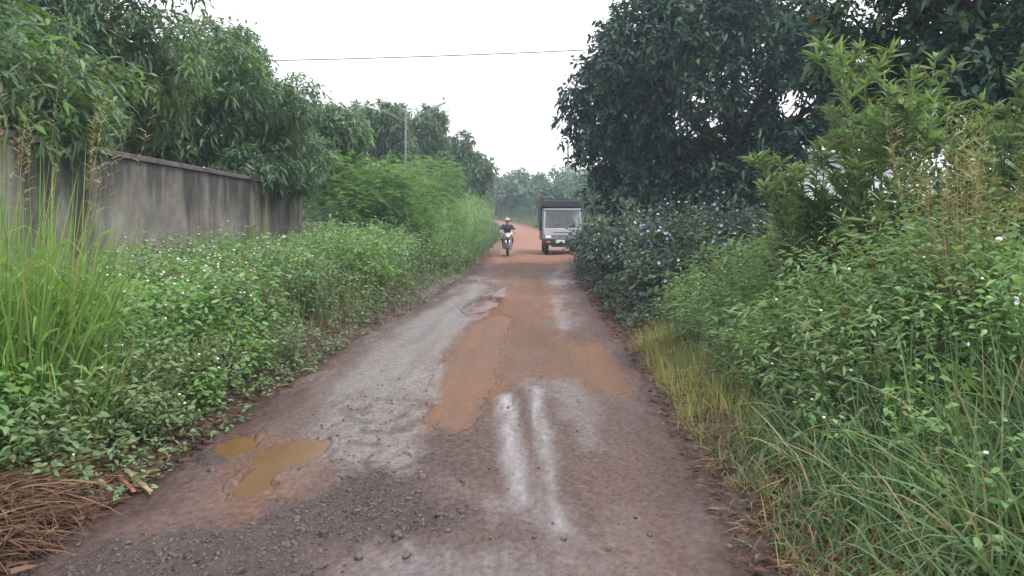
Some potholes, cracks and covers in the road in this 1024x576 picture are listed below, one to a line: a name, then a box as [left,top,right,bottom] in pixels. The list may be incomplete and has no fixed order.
pothole [418,312,517,437]
pothole [456,295,507,316]
pothole [567,341,639,398]
pothole [221,434,344,502]
